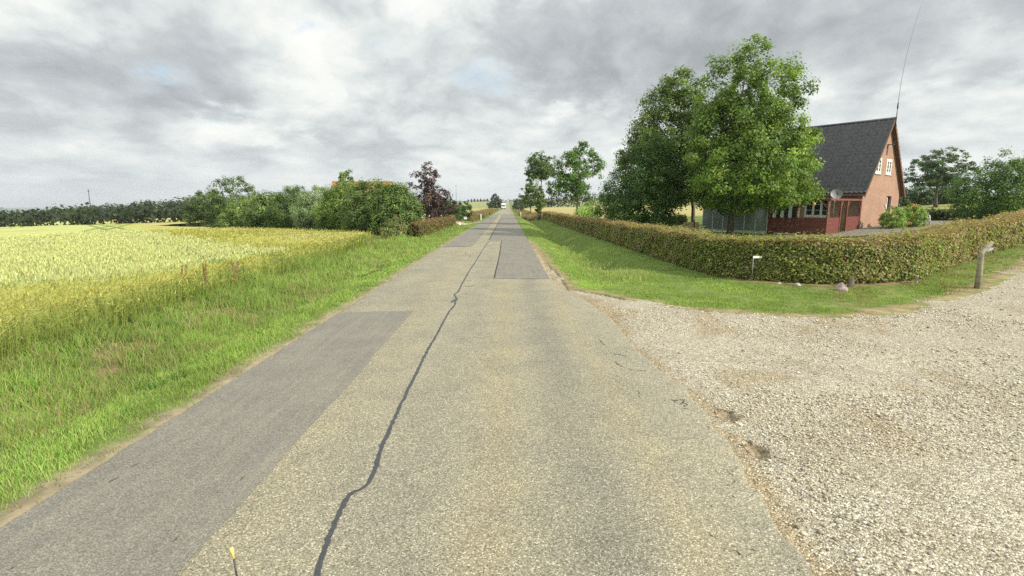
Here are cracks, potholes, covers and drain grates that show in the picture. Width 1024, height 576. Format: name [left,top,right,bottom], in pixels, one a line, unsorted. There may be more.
pothole [741,440,772,460]
pothole [714,408,742,423]
